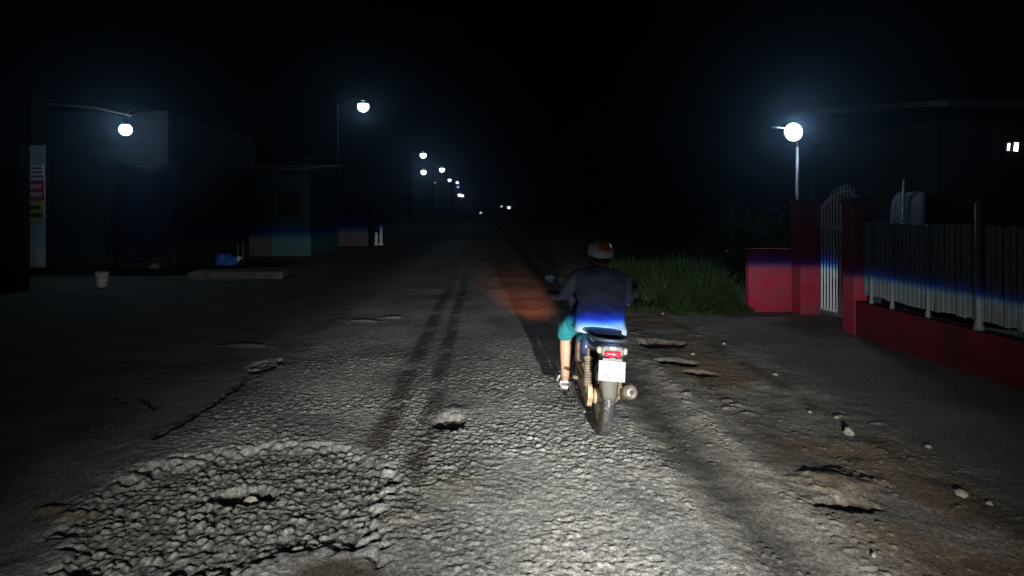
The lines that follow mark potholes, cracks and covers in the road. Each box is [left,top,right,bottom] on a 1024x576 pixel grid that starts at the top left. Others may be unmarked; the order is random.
pothole [631,338,691,349]
pothole [807,493,889,514]
crack [117,373,265,440]
pothole [680,369,722,378]
pothole [652,357,701,367]
pothole [426,409,472,432]
